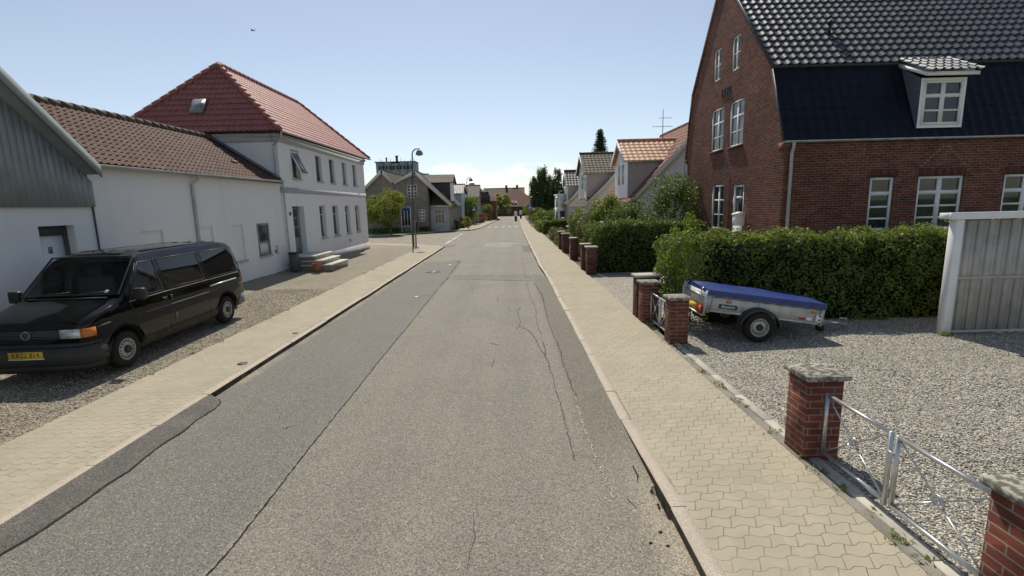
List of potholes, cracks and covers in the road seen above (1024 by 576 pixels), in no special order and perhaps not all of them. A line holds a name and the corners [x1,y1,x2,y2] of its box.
crack [462,252,639,508]
